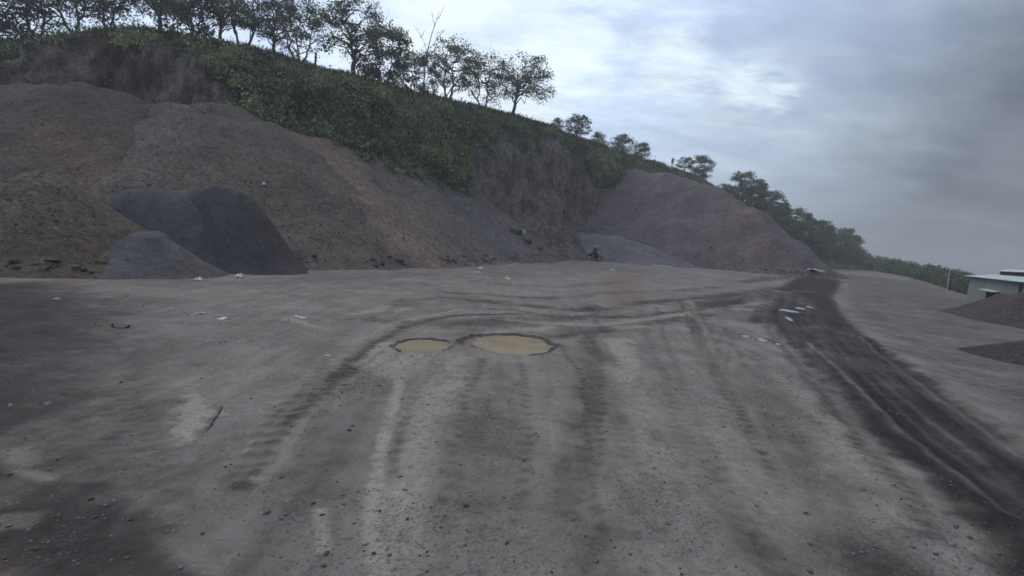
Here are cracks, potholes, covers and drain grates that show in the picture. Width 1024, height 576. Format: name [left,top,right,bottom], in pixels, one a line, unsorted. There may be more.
pothole [442,332,568,359]
pothole [379,337,464,356]
